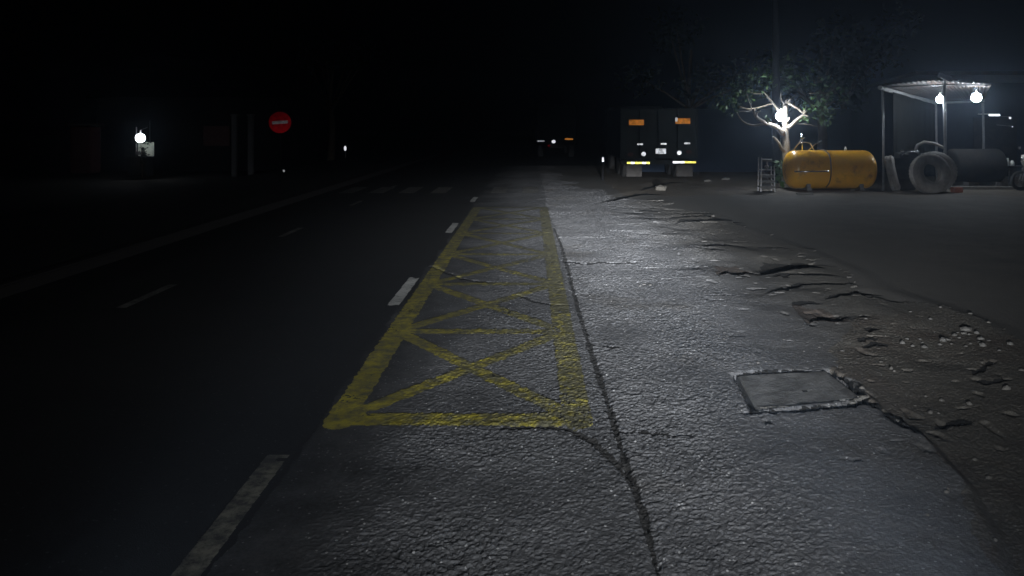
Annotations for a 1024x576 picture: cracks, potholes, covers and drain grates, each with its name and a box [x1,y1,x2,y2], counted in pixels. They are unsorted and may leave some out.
crack [431,267,488,283]
manhole cover [738,371,869,411]
crack [502,182,740,576]
pothole [792,304,849,324]
